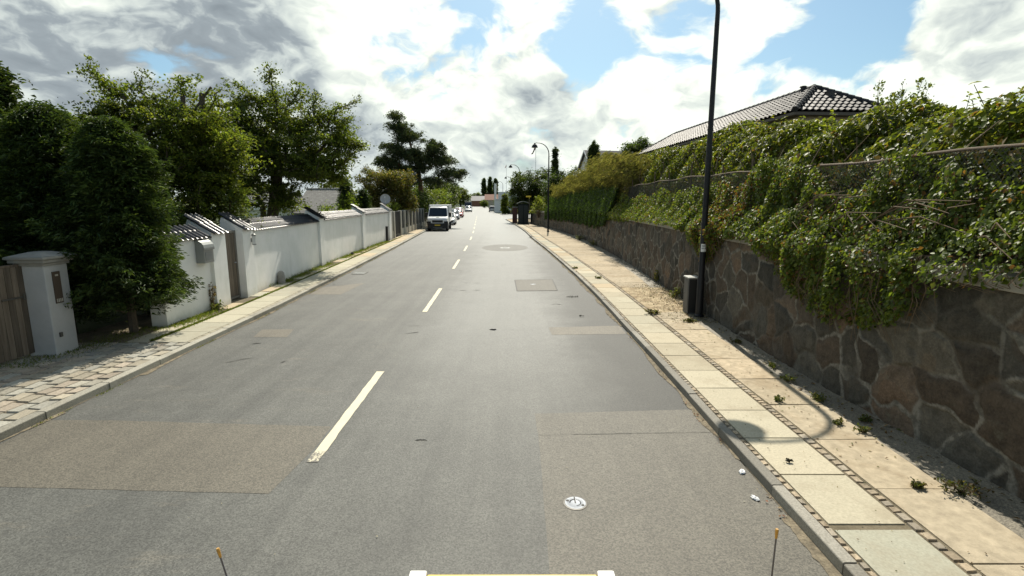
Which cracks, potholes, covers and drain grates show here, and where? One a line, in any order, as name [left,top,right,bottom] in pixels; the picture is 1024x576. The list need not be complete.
manhole cover [563,496,588,510]
